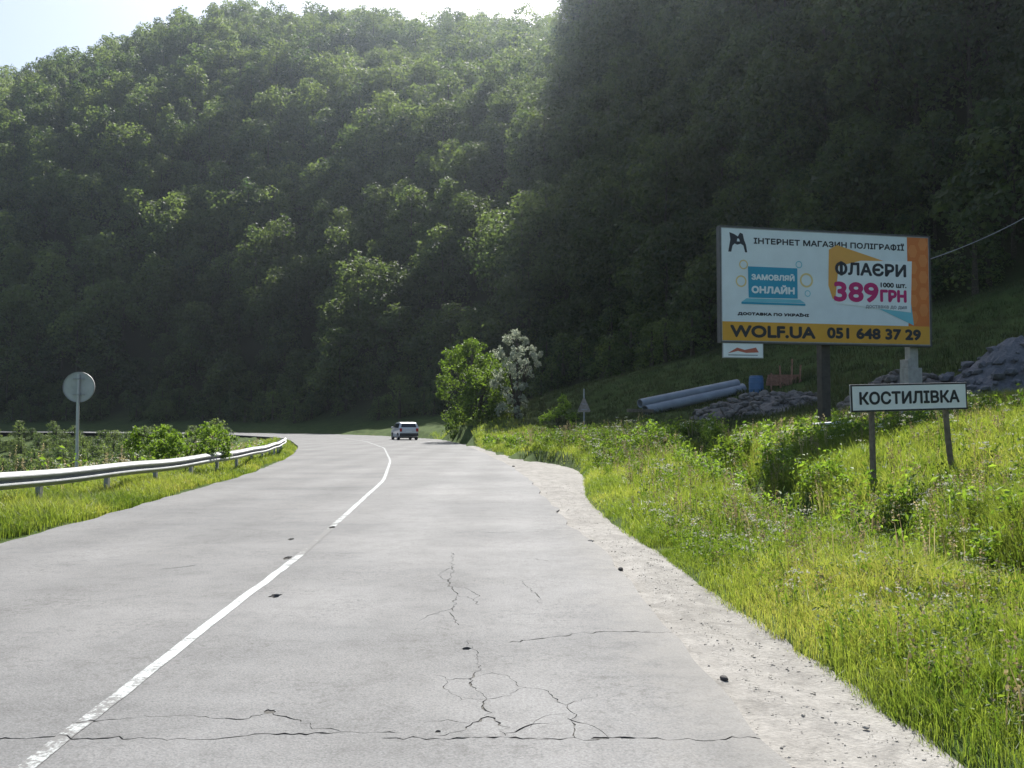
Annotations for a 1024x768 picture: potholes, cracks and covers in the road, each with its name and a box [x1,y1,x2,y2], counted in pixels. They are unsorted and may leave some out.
crack [0,642,760,741]
crack [421,554,480,625]
